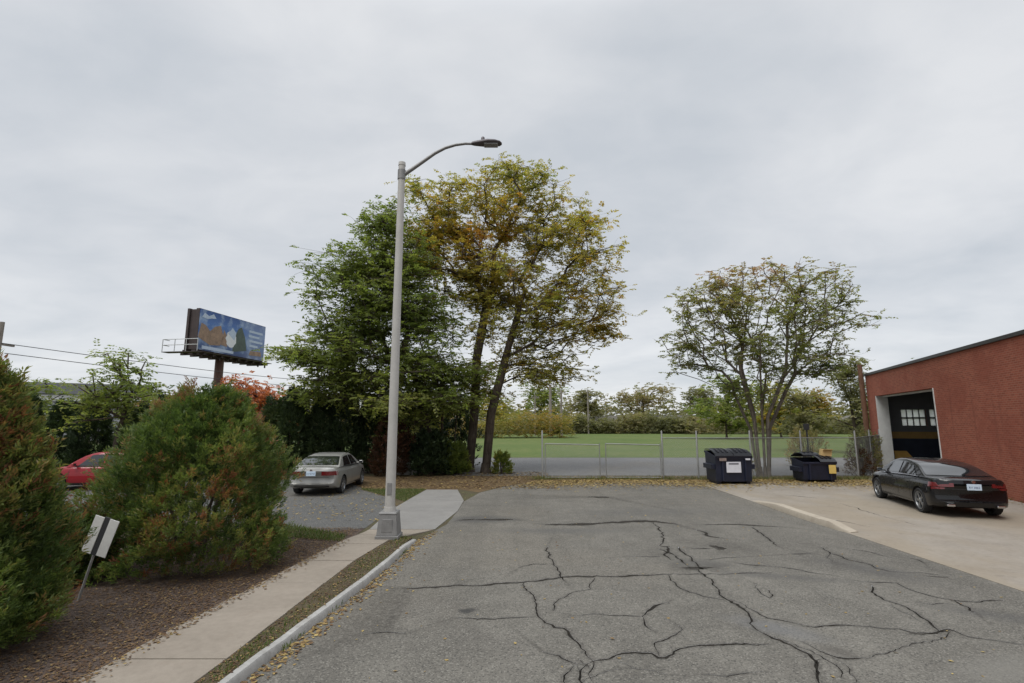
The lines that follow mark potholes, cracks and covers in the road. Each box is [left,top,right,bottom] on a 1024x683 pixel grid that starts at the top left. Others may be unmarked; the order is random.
crack [408,520,1023,683]
